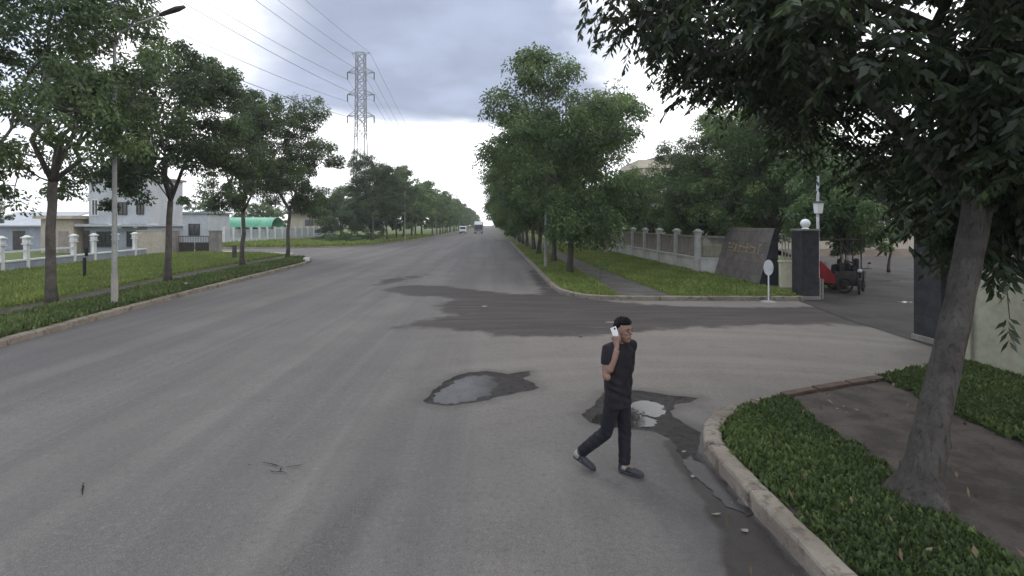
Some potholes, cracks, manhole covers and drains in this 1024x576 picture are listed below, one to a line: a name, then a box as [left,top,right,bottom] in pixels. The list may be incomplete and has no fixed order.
pothole [582,390,702,463]
pothole [423,371,539,406]
